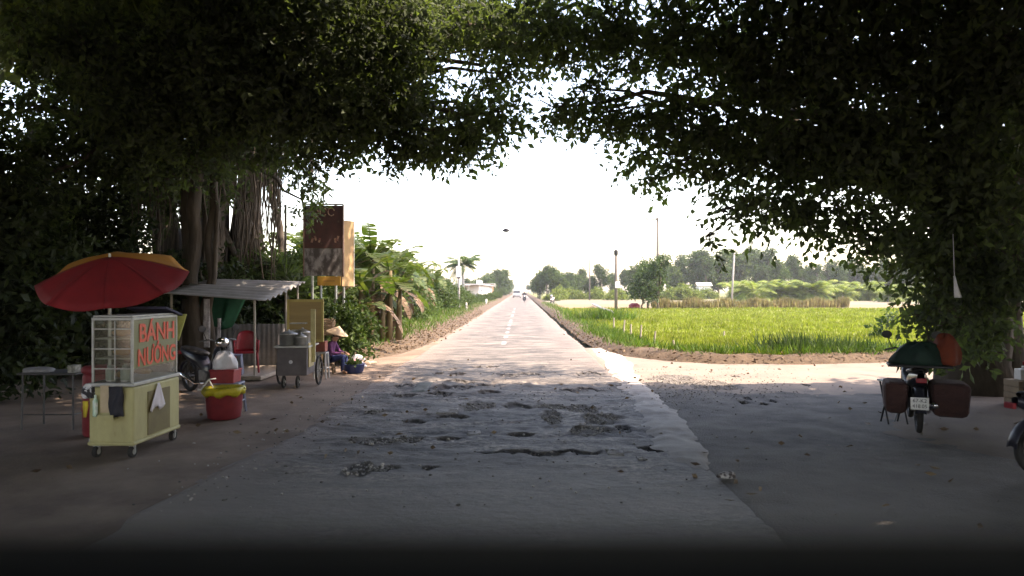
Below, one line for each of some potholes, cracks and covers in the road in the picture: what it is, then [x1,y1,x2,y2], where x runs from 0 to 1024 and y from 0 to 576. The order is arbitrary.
pothole [539,409,563,426]
pothole [458,401,497,411]
pothole [342,436,401,446]
pothole [580,412,626,425]
pothole [371,462,400,472]
pothole [394,435,426,443]
pothole [564,404,600,414]
pothole [568,423,617,437]
pothole [340,461,377,477]
